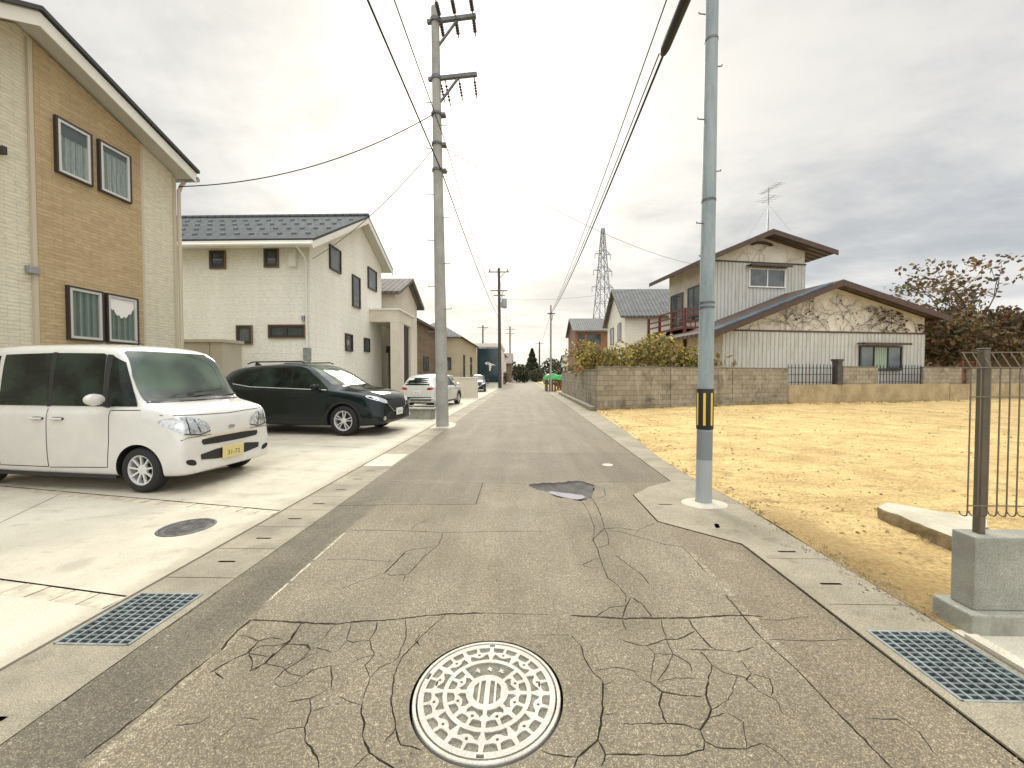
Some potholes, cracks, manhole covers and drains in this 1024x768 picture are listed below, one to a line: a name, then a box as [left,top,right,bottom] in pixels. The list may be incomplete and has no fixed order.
drain grate [53,592,203,685]
crack [331,481,524,588]
manhole cover [412,642,561,768]
manhole cover [155,518,217,537]
drain grate [866,630,1024,759]
pothole [529,481,595,503]
crack [0,561,544,768]
crack [542,482,938,768]
